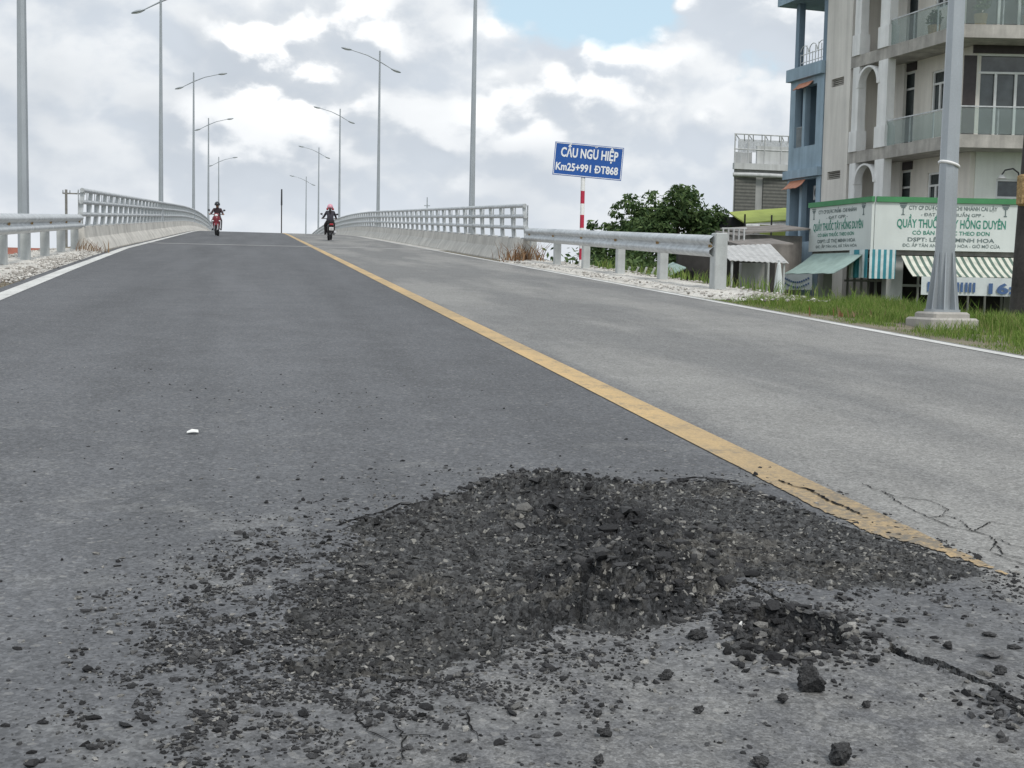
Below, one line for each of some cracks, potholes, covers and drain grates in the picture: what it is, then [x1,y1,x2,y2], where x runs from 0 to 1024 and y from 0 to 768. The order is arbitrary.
crack [353,707,483,763]
crack [877,632,1024,716]
pothole [281,472,986,684]
crack [862,483,1023,564]
